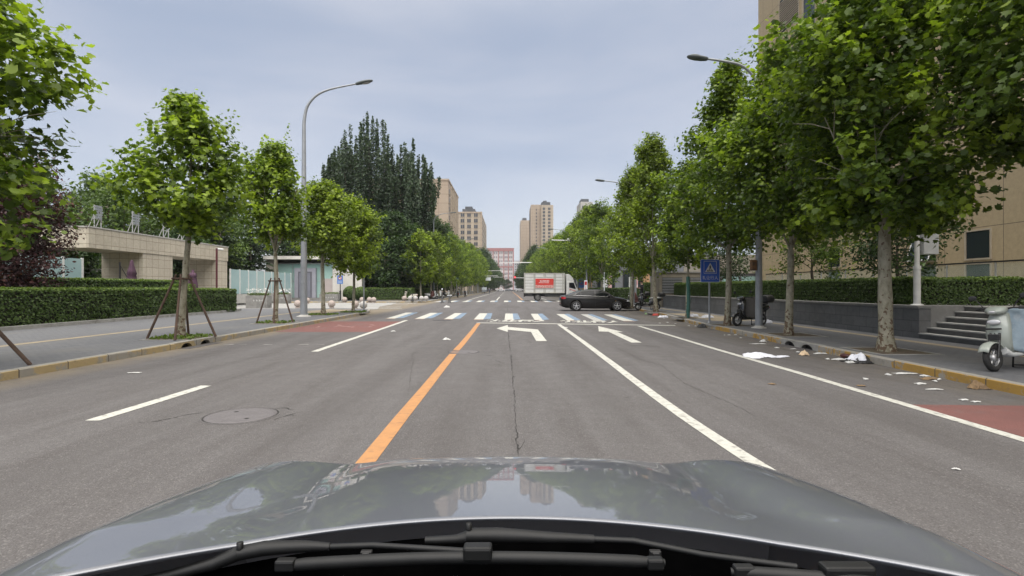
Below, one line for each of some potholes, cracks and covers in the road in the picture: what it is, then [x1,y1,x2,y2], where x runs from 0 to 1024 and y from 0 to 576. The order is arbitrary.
drain grate [172,337,223,349]
crack [491,303,525,453]
manhole cover [199,407,281,425]
drain grate [772,338,826,352]
